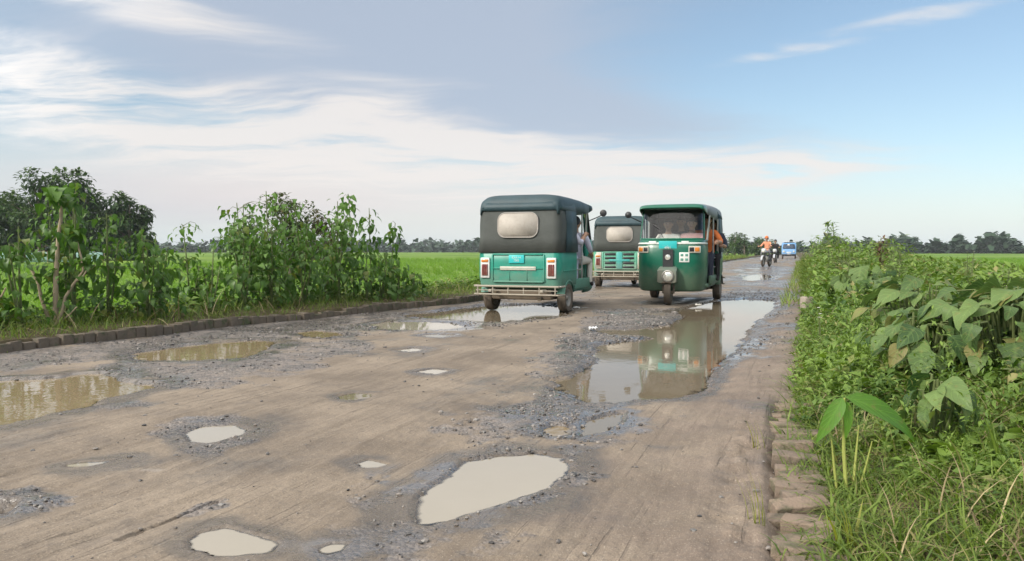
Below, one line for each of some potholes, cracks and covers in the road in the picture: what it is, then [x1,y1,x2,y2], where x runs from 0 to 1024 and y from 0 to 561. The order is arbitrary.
pothole [290,330,350,338]
crack [115,498,226,541]
pothole [354,458,394,468]
pothole [184,422,254,443]
pothole [120,337,285,361]
pothole [0,496,29,518]
pothole [364,320,478,330]
pothole [410,450,579,526]
pothole [543,297,780,403]
pothole [0,370,170,425]
pothole [392,303,577,322]
pothole [566,410,630,436]
